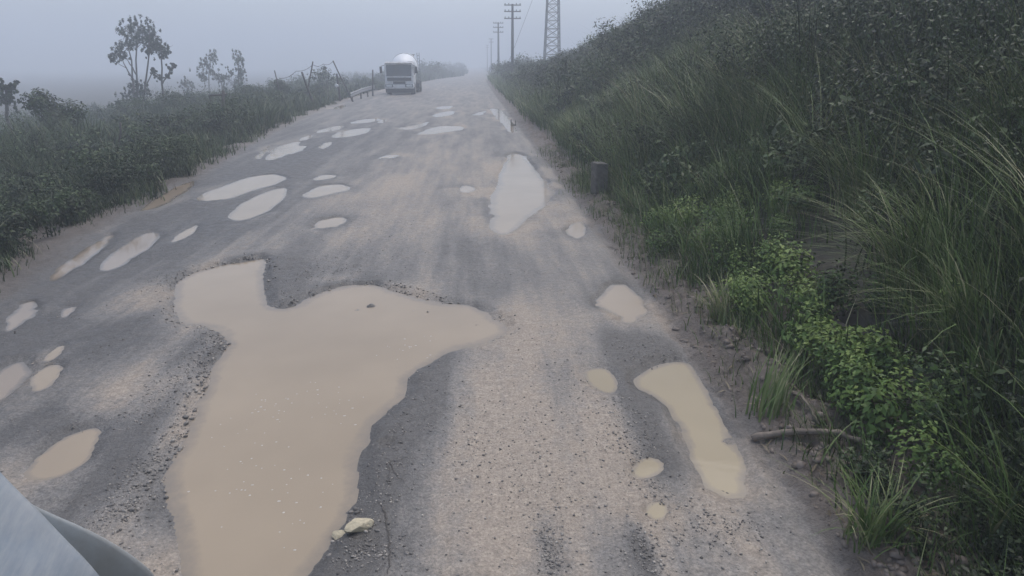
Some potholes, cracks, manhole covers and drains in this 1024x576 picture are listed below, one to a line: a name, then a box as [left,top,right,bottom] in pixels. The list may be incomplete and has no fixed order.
pothole [0,296,53,338]
pothole [260,141,312,161]
pothole [18,356,77,397]
pothole [293,182,357,199]
pothole [0,415,126,491]
pothole [218,185,294,222]
crack [378,501,391,574]
pothole [569,360,630,398]
pothole [411,125,469,135]
pothole [302,214,357,230]
pothole [619,350,781,512]
pothole [122,252,525,576]
